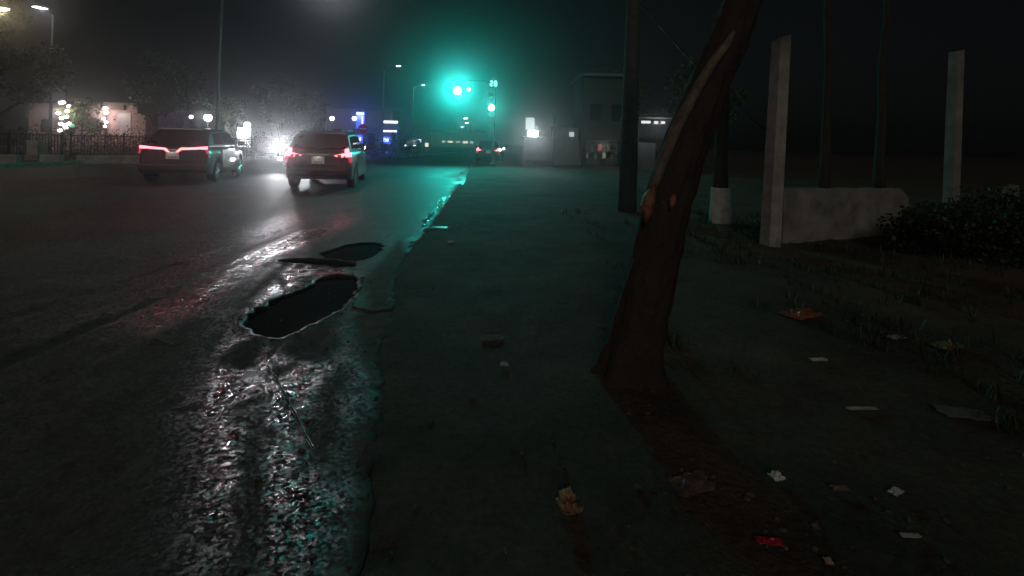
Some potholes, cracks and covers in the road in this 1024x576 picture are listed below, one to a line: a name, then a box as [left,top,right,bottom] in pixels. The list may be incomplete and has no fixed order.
crack [265,364,315,449]
pothole [319,242,385,261]
pothole [275,257,358,268]
pothole [232,272,371,341]
